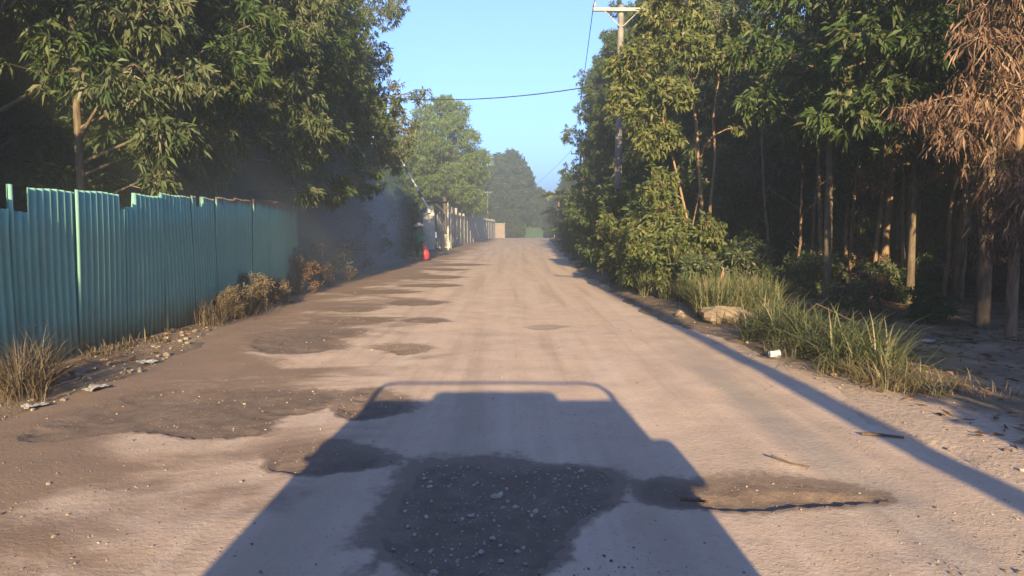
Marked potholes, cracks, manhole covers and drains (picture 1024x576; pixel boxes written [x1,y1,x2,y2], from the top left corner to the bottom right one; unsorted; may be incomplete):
pothole [267,442,384,475]
pothole [312,317,391,325]
pothole [379,462,618,576]
pothole [16,388,338,442]
pothole [335,391,403,420]
pothole [376,344,427,355]
pothole [637,480,890,512]
pothole [250,329,356,354]
